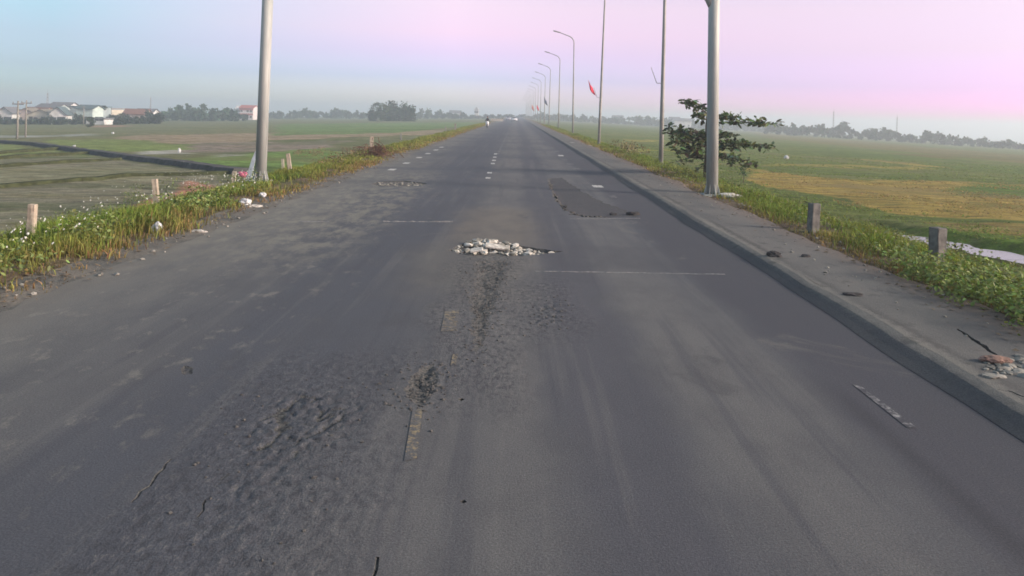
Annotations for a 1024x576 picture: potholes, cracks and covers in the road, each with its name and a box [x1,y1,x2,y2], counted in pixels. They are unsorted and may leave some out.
pothole [403,364,439,407]
crack [957,329,997,355]
crack [131,376,387,576]
pothole [449,242,562,256]
